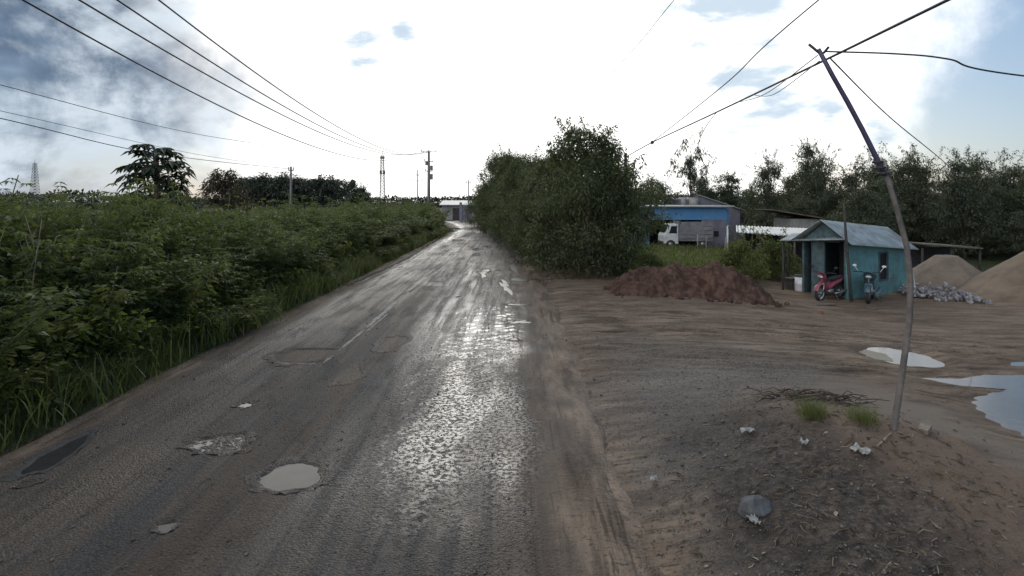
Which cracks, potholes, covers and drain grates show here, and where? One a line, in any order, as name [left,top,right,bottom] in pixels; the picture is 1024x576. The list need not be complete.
pothole [245,455,334,495]
pothole [150,518,184,534]
pothole [175,429,258,456]
pothole [229,399,259,409]
